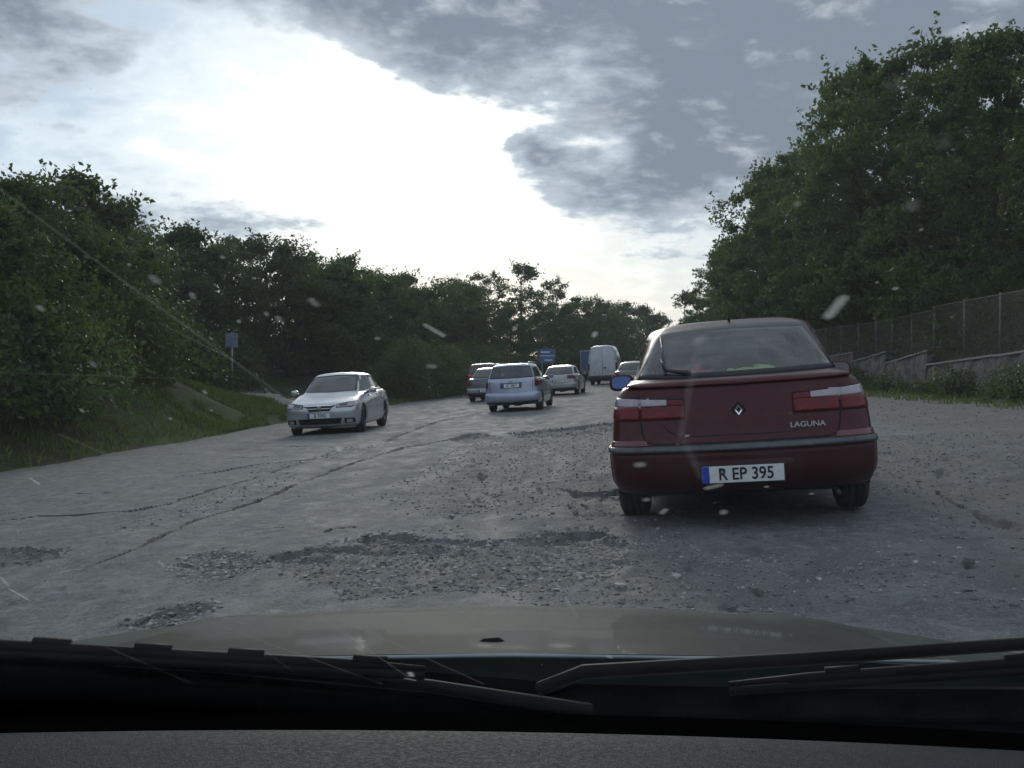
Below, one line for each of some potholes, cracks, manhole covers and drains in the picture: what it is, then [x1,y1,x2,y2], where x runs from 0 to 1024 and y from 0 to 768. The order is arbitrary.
pothole [259,531,627,599]
pothole [0,547,62,567]
pothole [959,557,980,570]
pothole [449,433,503,444]
pothole [516,422,613,438]
pothole [556,487,620,502]
crack [0,413,480,572]
pothole [127,600,216,628]
pothole [174,550,262,580]
